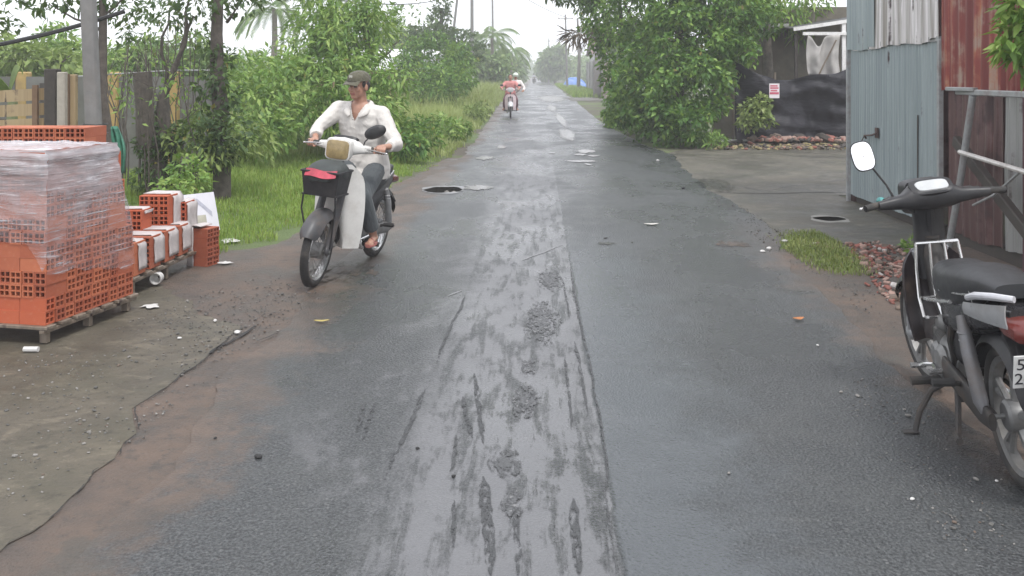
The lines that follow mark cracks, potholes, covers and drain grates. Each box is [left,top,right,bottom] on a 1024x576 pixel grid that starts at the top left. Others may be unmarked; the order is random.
crack [2,326,255,551]
